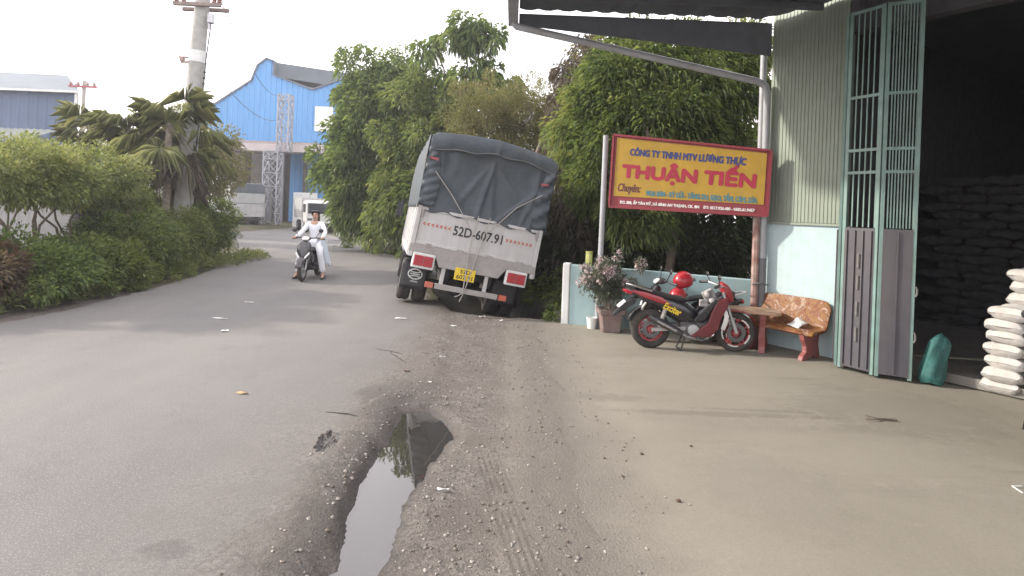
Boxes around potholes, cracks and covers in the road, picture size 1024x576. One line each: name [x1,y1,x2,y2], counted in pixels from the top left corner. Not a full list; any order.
pothole [313,430,344,452]
